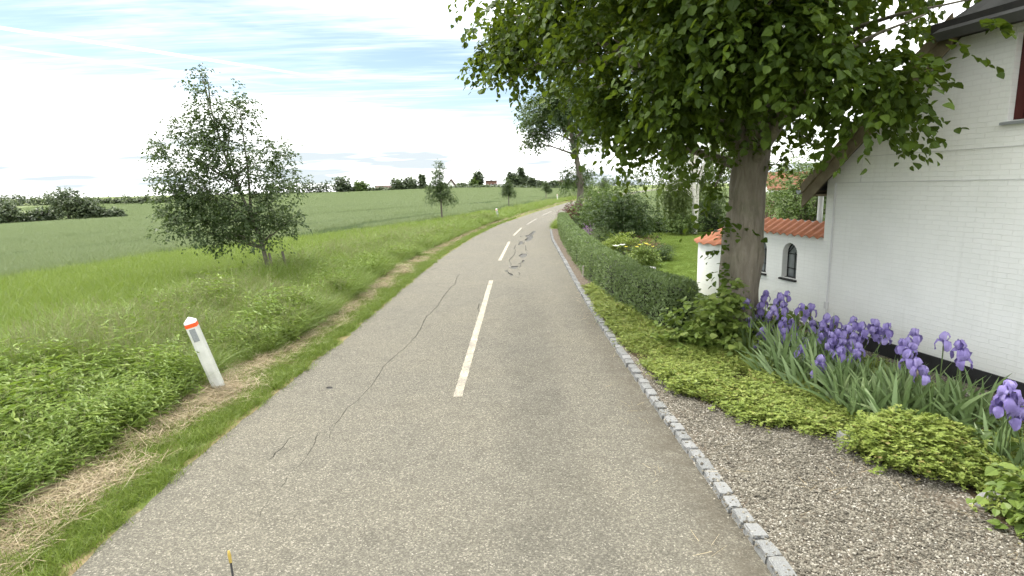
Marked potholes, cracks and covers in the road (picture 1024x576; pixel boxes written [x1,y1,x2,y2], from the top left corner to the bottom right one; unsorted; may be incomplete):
crack [260,276,458,516]
